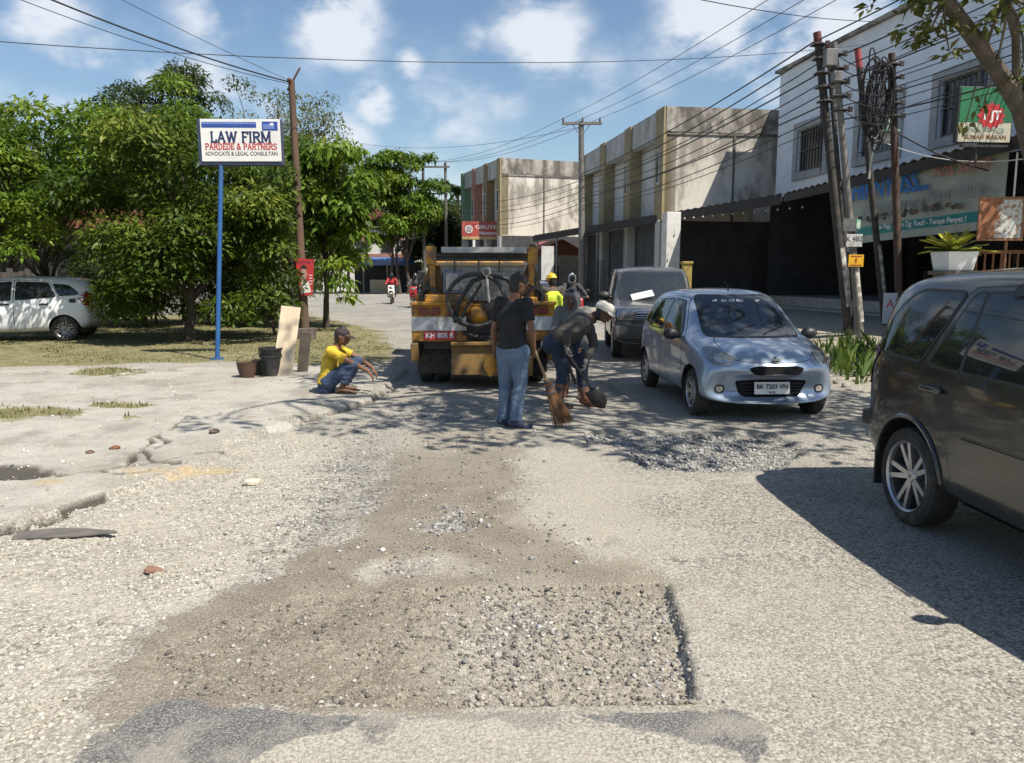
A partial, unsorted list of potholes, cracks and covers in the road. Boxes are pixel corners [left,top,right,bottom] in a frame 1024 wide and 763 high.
crack [0,414,228,537]
pothole [579,430,811,473]
pothole [0,462,56,481]
pothole [408,506,487,537]
pothole [128,580,707,712]
